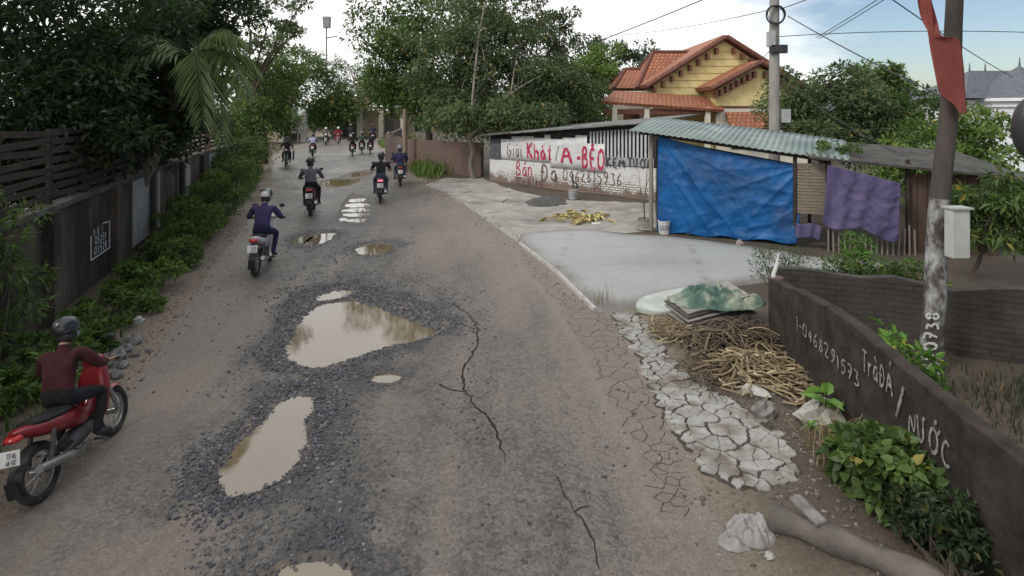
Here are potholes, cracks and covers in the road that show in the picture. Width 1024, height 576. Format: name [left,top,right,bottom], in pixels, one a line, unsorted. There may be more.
pothole [366,370,404,383]
pothole [258,550,361,576]
crack [525,255,803,516]
pothole [352,241,397,256]
pothole [208,384,320,499]
pothole [288,230,340,247]
crack [553,473,600,569]
pothole [318,177,369,189]
crack [437,292,506,462]
pothole [272,284,449,374]
